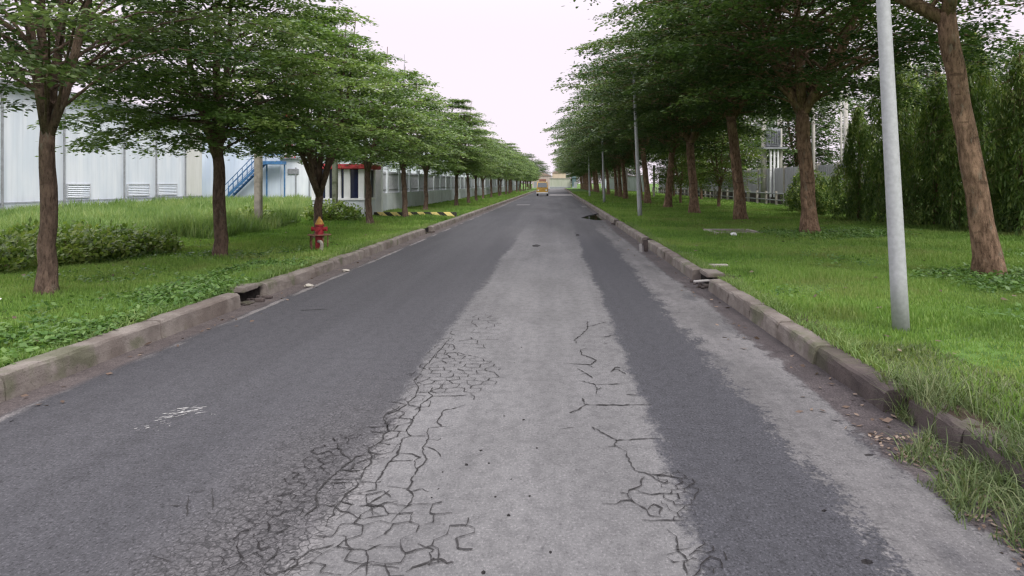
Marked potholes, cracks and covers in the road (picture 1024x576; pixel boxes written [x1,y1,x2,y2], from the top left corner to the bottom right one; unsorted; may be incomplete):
drain grate [229,283,273,306]
crack [211,316,499,576]
crack [560,321,727,576]
